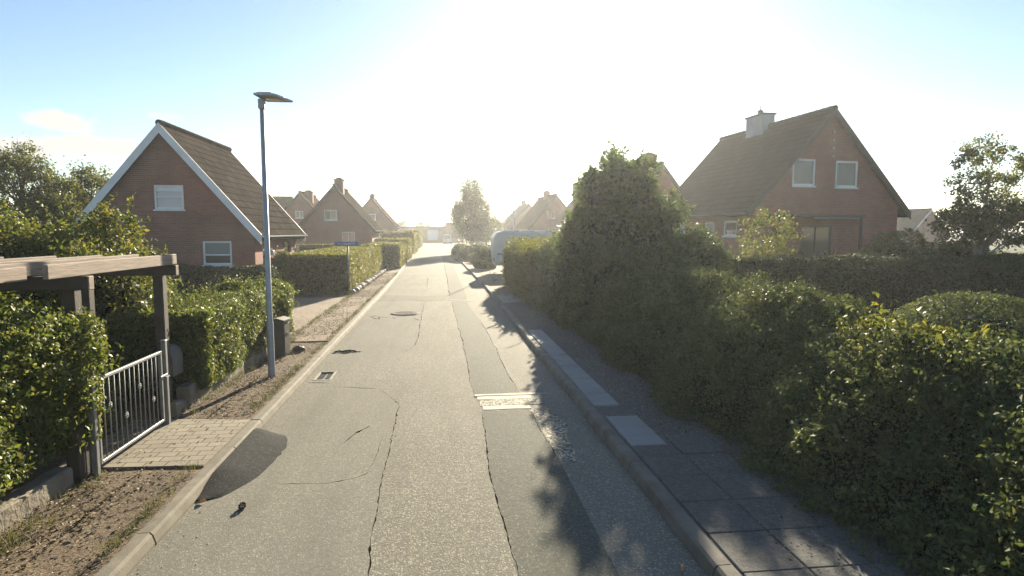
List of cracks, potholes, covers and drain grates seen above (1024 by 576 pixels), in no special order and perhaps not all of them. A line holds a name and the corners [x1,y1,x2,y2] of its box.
crack [290,426,381,484]
drain grate [312,371,337,381]
